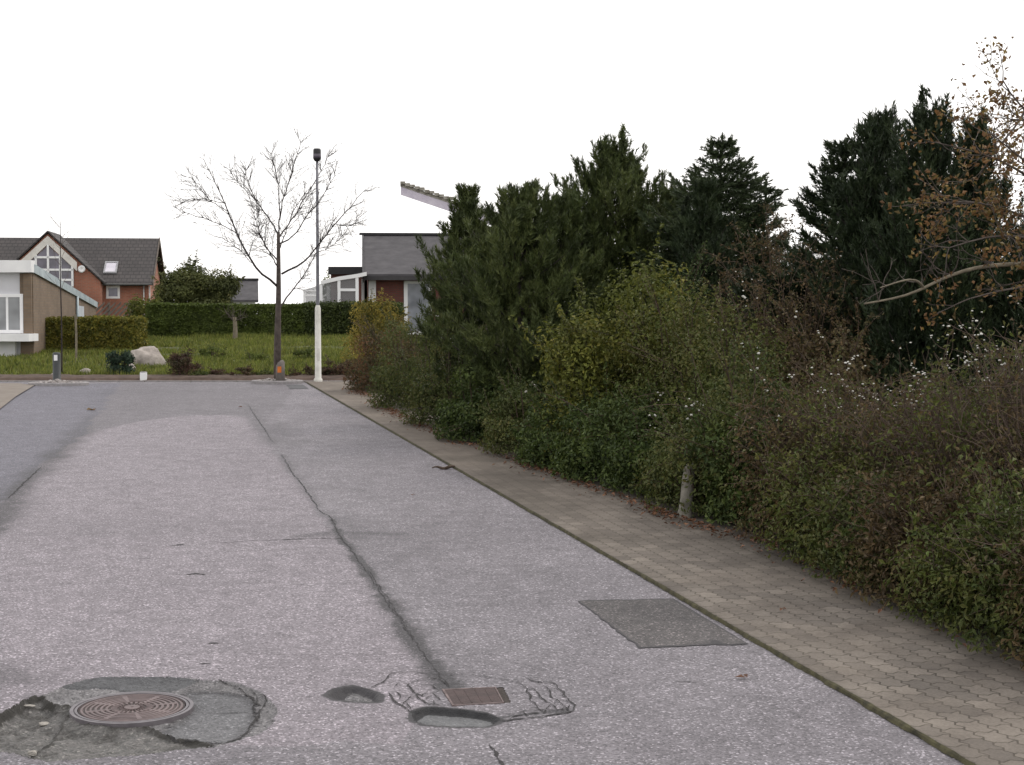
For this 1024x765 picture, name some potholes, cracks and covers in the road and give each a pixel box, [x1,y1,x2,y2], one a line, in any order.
manhole cover [69,691,194,728]
crack [489,744,504,765]
pothole [326,685,381,703]
pothole [411,707,501,727]
crack [209,406,576,721]
